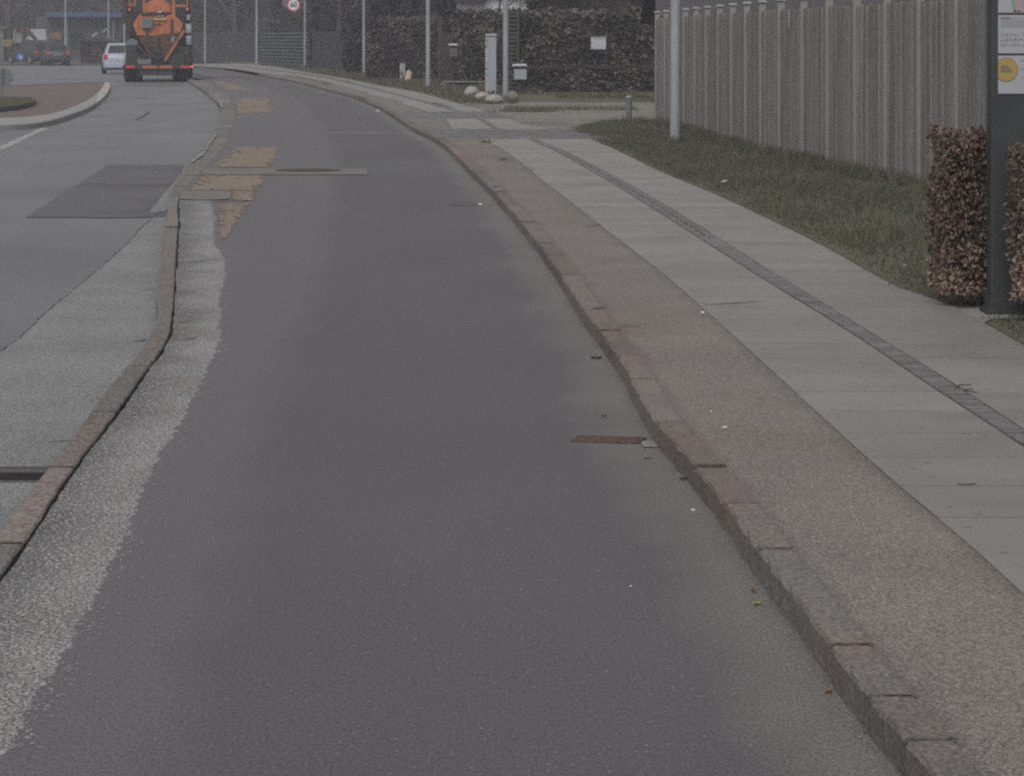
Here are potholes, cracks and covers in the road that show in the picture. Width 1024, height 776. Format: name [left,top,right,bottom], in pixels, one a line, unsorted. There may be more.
drain grate [571,435,647,444]
drain grate [0,466,49,482]
